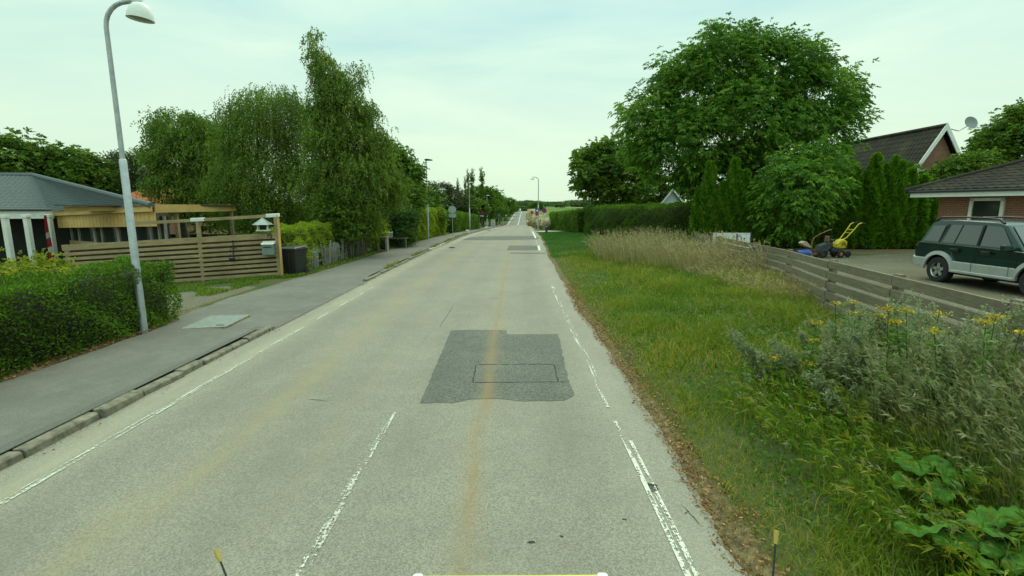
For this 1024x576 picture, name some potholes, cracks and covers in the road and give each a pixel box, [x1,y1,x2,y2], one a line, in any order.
manhole cover [181,315,251,329]
